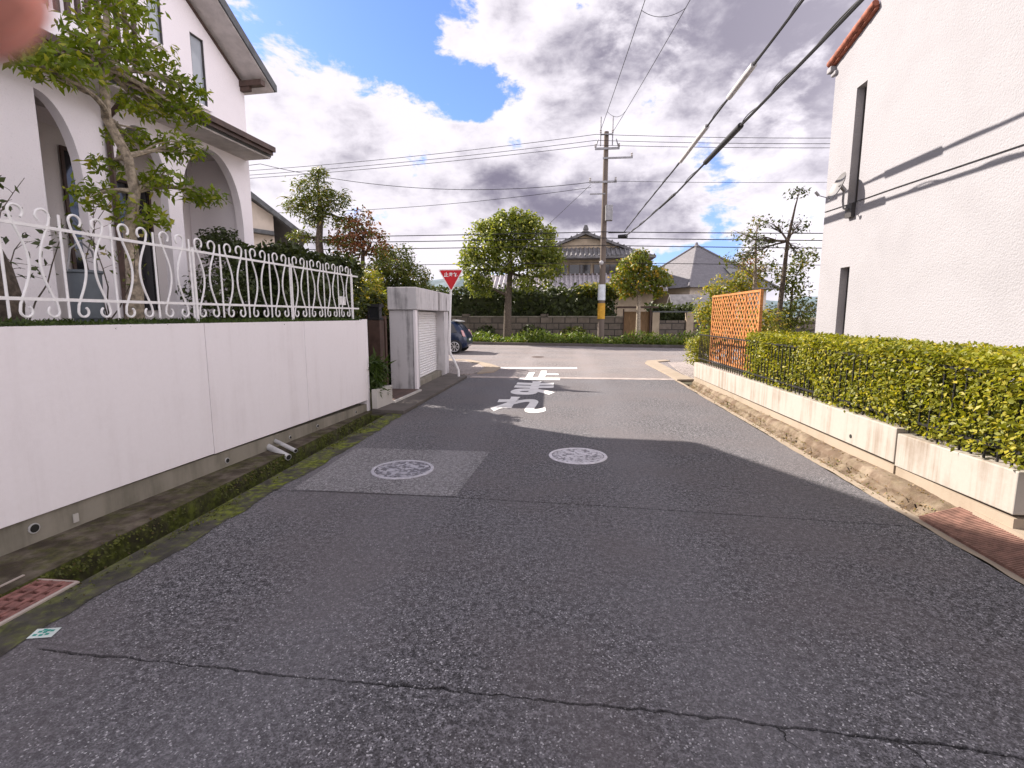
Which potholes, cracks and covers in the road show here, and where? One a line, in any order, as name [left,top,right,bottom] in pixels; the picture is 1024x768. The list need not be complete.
manhole cover [549,448,607,464]
crack [69,654,930,768]
manhole cover [371,460,434,479]
